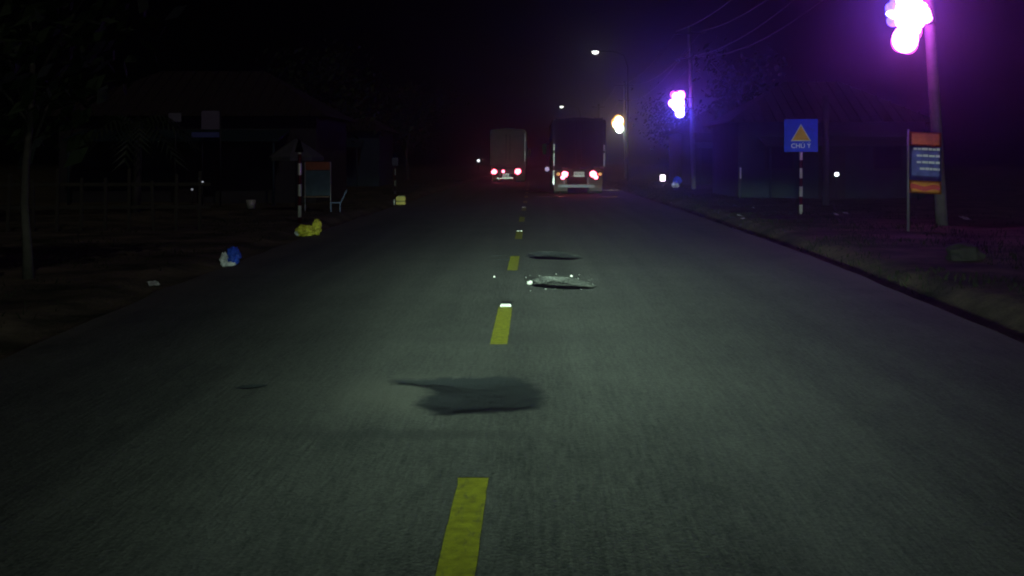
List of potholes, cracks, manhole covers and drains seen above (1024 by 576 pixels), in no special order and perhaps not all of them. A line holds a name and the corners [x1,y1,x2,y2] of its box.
pothole [387,375,551,416]
pothole [525,251,583,260]
pothole [529,276,597,290]
